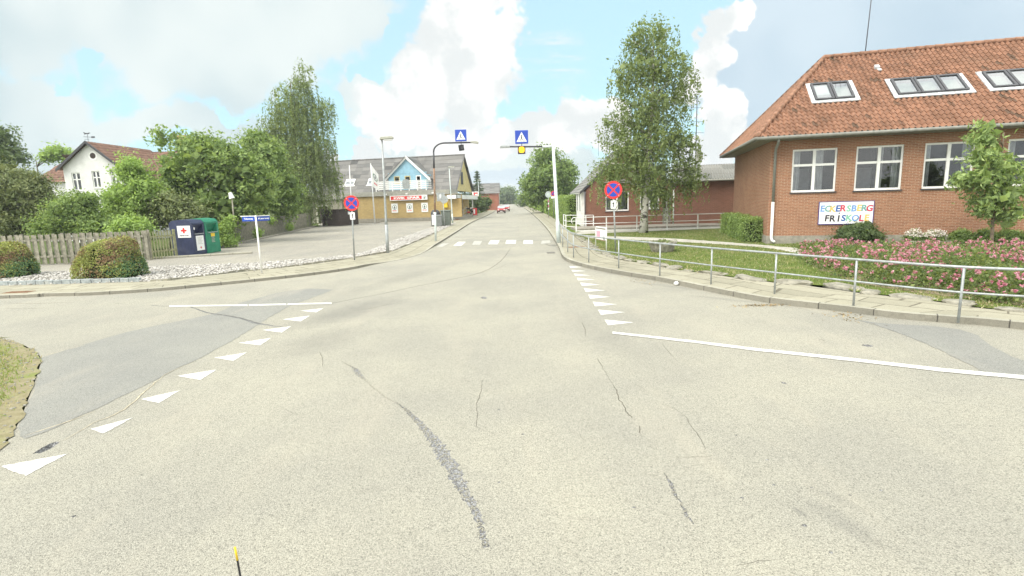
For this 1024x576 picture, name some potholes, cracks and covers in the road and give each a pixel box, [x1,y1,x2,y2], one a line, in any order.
crack [320,353,493,548]
crack [664,408,708,524]
